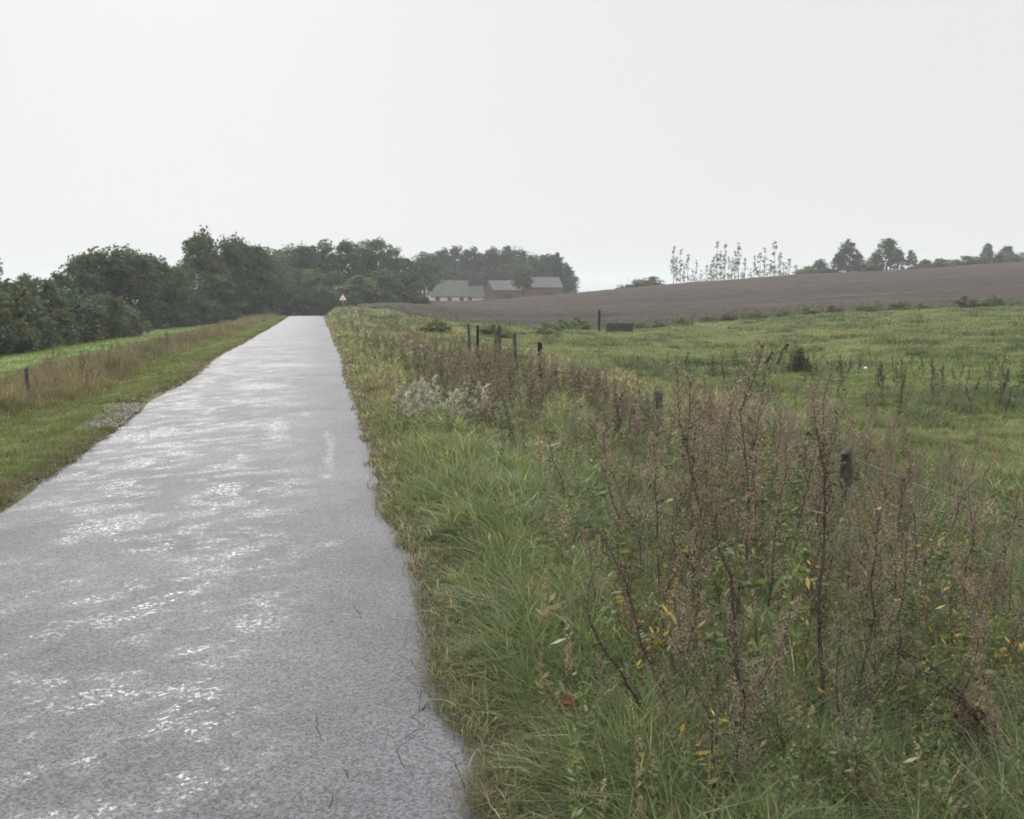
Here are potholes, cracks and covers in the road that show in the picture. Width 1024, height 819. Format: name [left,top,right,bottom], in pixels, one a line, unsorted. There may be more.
crack [396,633,428,783]
